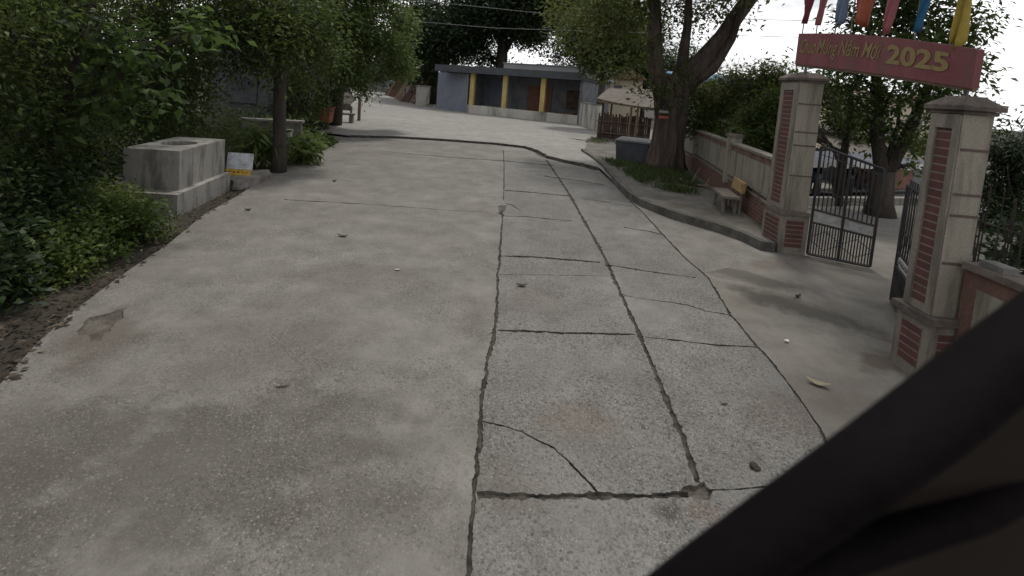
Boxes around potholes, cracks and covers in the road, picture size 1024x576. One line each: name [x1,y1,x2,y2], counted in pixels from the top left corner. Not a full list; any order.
pothole [680,482,713,500]
crack [499,256,695,278]
pothole [77,307,129,341]
crack [498,330,756,348]
crack [623,294,731,316]
crack [476,421,691,501]
